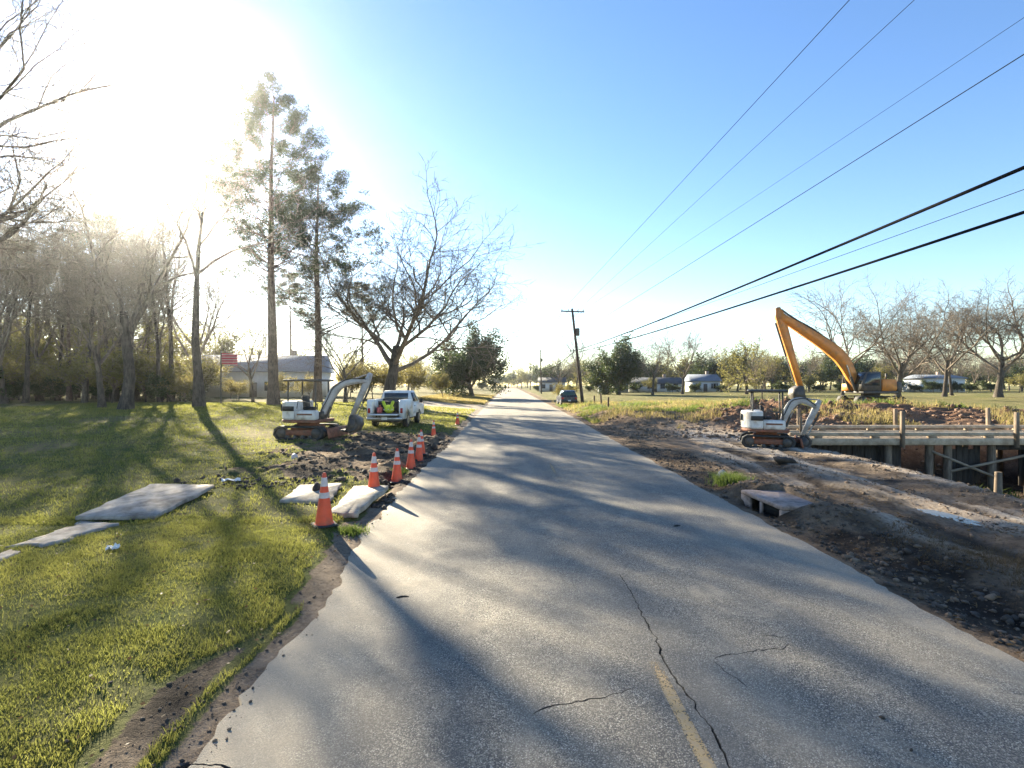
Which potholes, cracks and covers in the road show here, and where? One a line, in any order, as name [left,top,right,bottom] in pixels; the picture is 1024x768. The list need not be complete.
crack [532,573,787,768]
